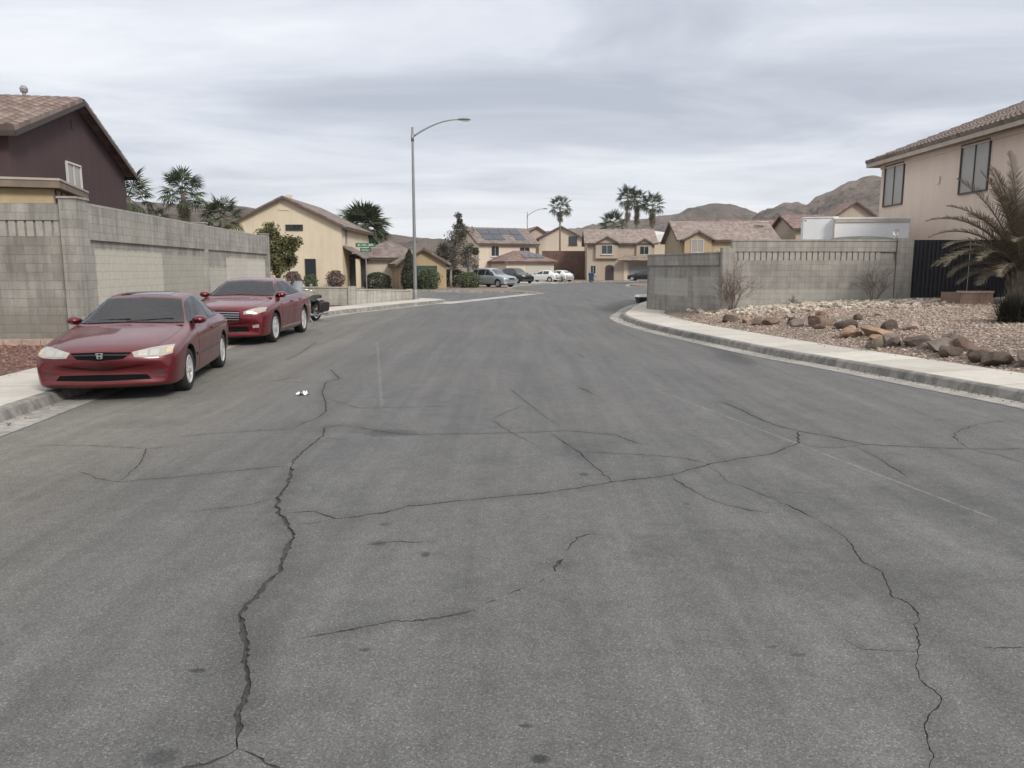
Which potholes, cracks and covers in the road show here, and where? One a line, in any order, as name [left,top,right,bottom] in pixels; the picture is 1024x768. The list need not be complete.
crack [32,370,1017,768]
